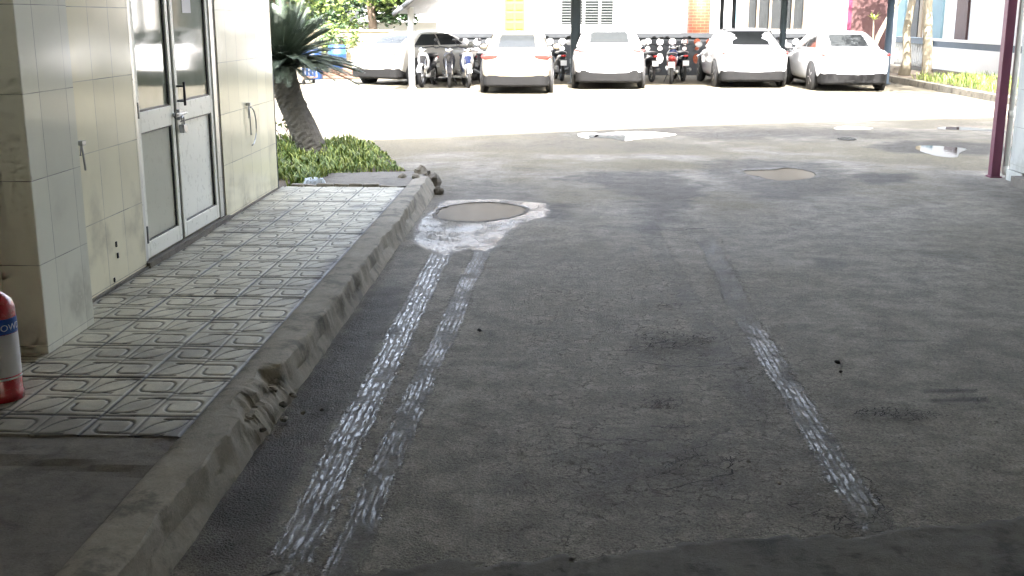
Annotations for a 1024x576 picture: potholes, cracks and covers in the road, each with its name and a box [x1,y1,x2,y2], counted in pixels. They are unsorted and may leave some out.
crack [787,476,893,532]
crack [578,395,760,489]
